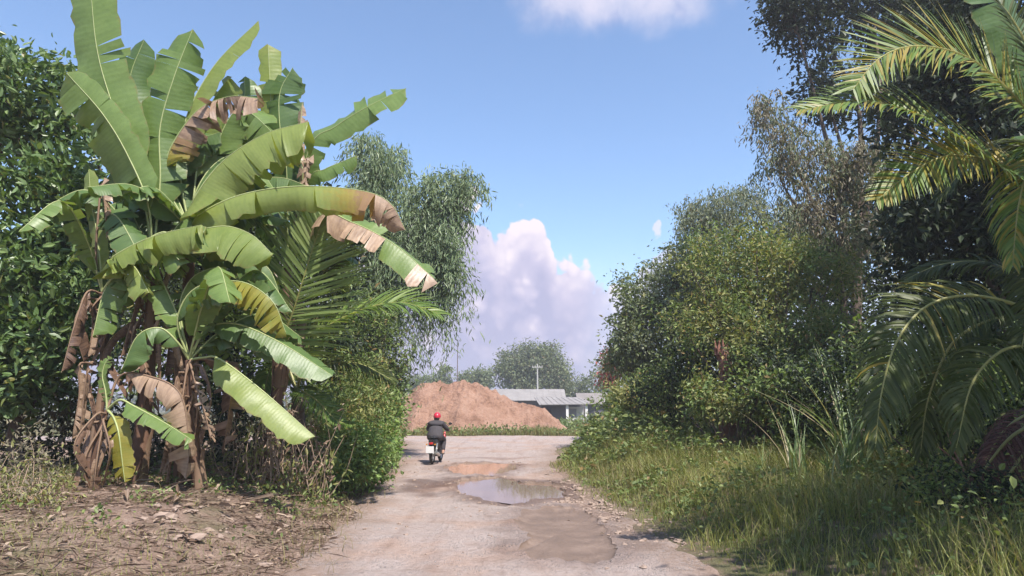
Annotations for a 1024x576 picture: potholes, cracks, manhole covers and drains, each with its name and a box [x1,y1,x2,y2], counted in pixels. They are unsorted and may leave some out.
pothole [443,461,520,476]
pothole [513,505,618,564]
pothole [454,475,567,505]
